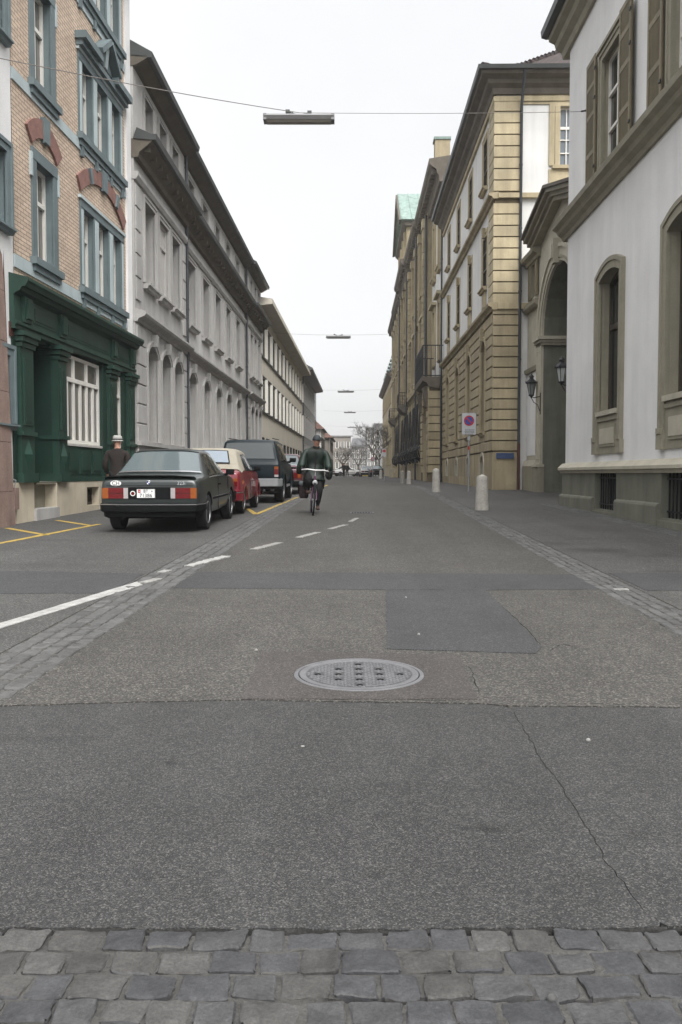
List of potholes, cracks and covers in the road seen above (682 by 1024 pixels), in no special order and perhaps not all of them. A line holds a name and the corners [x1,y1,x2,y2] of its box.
manhole cover [294,658,424,691]
crack [0,713,682,936]
